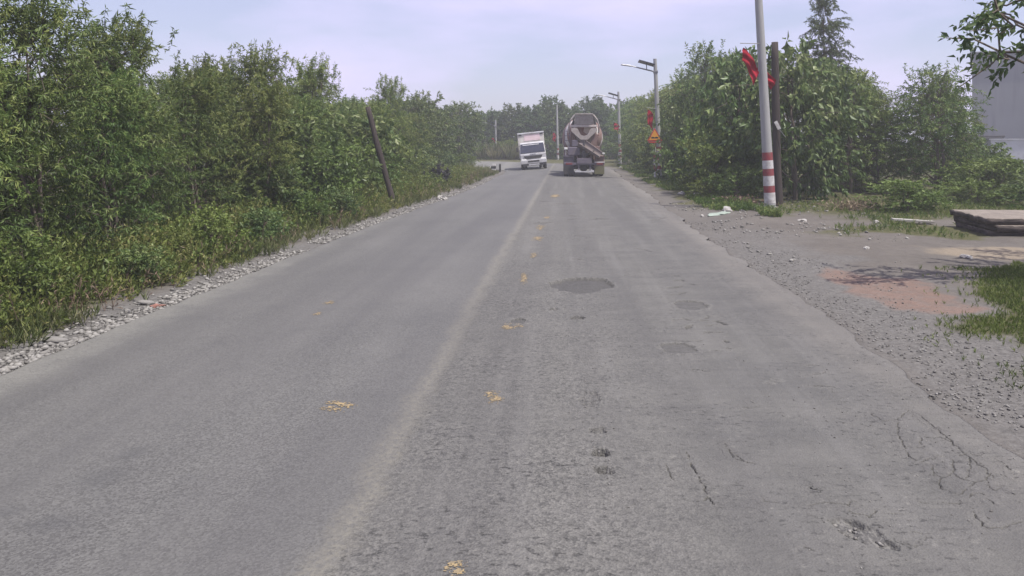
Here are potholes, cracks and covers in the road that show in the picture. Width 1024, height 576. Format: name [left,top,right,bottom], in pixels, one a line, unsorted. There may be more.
pothole [582,444,621,461]
crack [657,439,763,509]
pothole [579,424,616,438]
pothole [668,299,713,312]
pothole [807,507,924,563]
pothole [584,461,625,480]
pothole [544,276,619,295]
pothole [654,341,703,356]
crack [750,407,1024,558]
